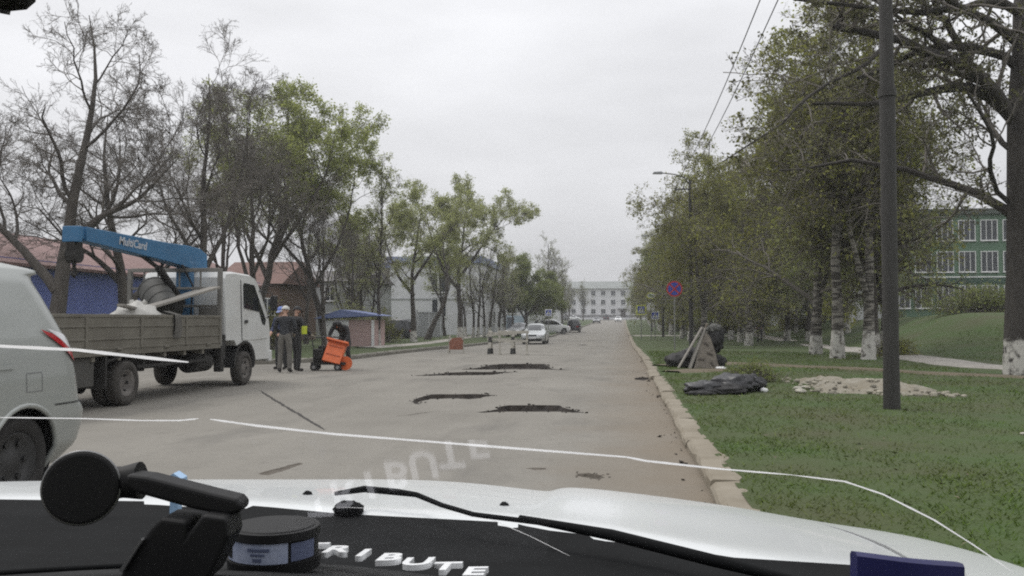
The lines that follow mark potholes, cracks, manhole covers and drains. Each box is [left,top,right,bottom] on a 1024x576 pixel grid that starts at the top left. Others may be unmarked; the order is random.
pothole [575,471,611,480]
pothole [481,404,588,413]
pothole [411,393,497,404]
